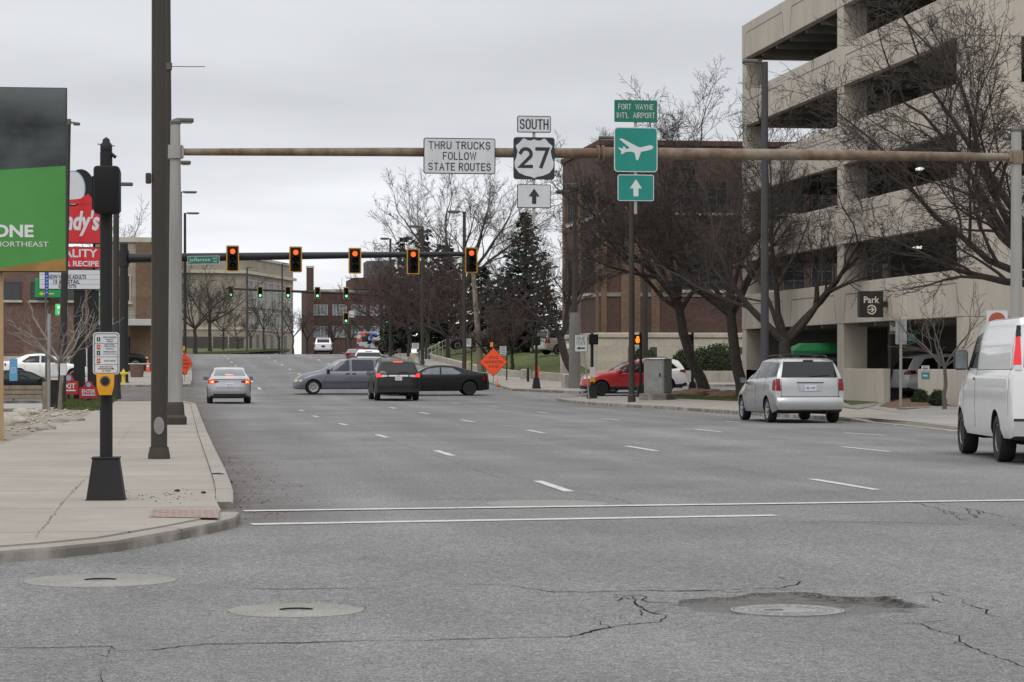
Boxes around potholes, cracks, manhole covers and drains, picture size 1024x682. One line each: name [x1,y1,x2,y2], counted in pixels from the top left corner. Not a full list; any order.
pothole [673,592,929,618]
crack [897,619,1024,667]
crack [20,576,800,682]
manhole cover [730,604,845,617]
manhole cover [227,603,364,618]
manhole cover [23,573,176,588]
